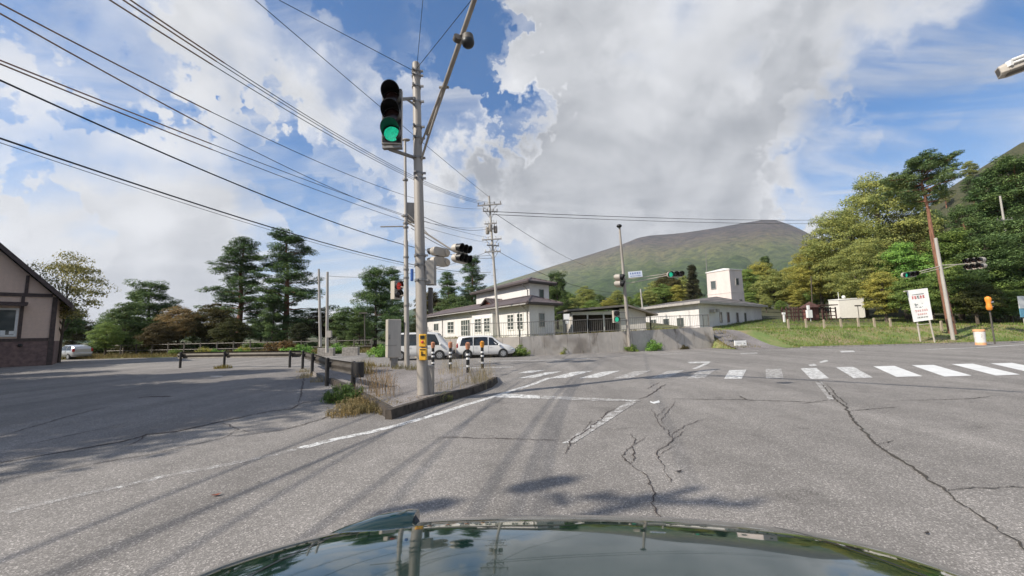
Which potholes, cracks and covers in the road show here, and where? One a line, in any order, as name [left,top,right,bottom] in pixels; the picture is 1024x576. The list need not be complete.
crack [428,381,1024,549]
